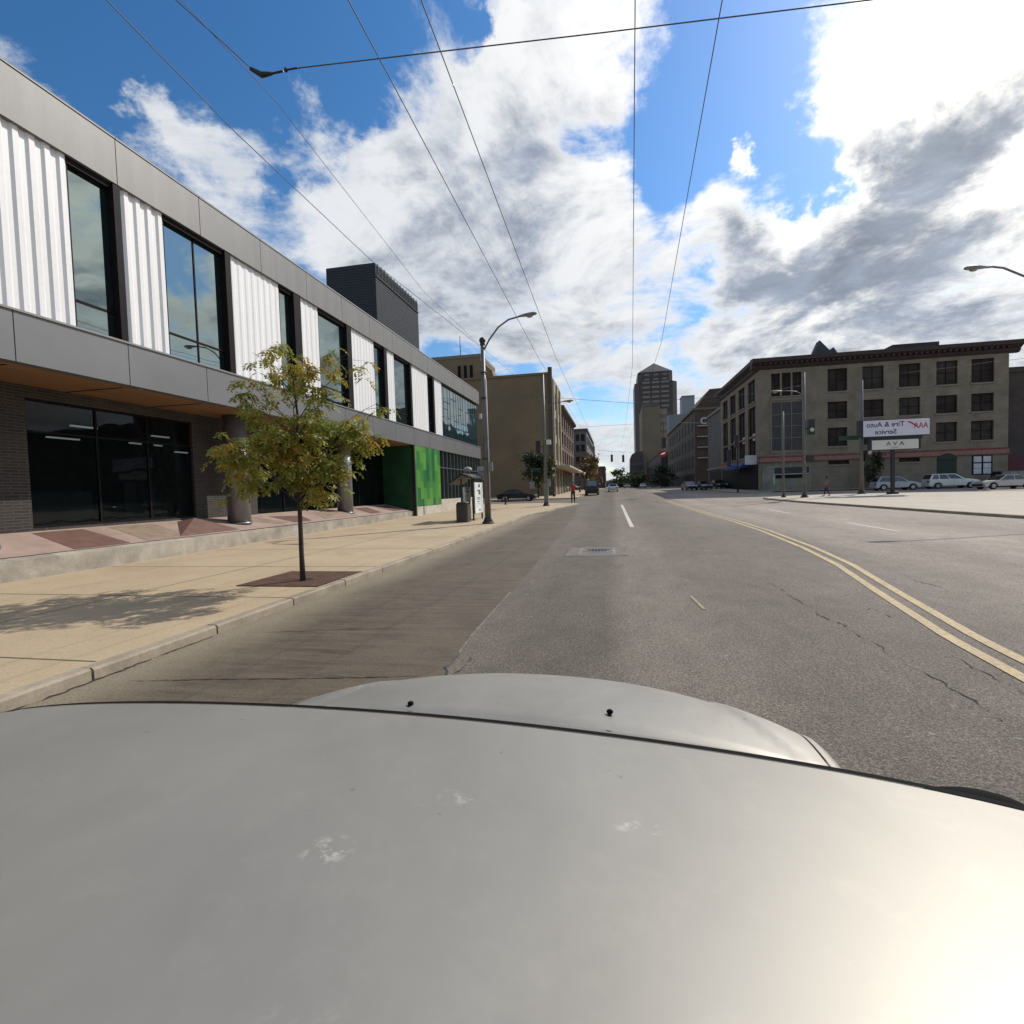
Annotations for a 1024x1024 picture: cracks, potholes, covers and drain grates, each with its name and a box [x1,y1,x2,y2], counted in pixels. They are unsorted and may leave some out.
crack [764,579,1024,726]
